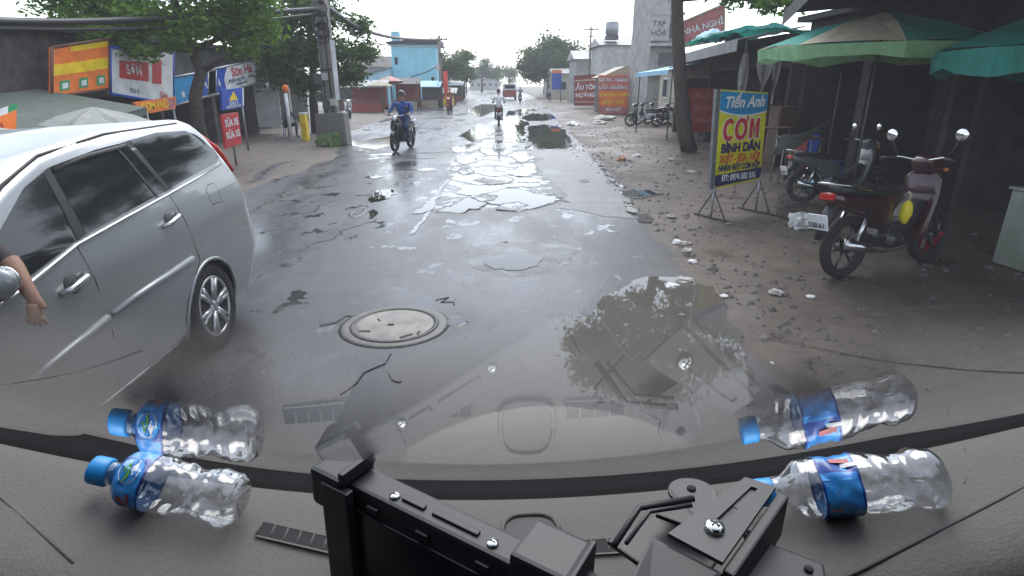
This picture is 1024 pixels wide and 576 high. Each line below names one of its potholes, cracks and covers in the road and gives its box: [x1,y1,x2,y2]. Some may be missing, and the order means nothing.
manhole cover [338,306,449,349]
pothole [521,124,577,150]
crack [247,161,377,248]
crack [354,353,391,385]
